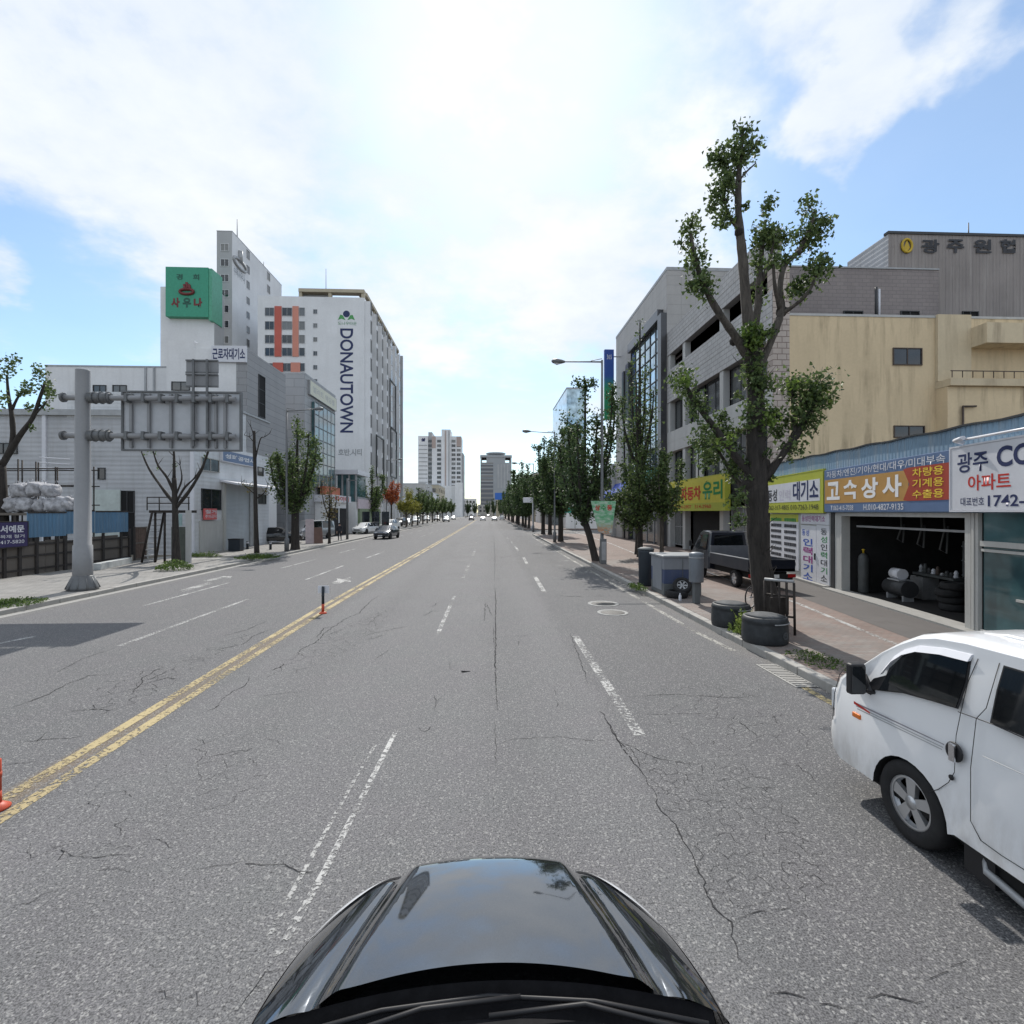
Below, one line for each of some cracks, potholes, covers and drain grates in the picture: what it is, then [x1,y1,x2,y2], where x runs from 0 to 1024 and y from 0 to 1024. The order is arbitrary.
crack [0,726,279,906]
crack [502,635,836,969]
crack [204,861,328,872]
crack [29,622,270,713]
crack [267,598,407,696]
drain grate [756,664,819,688]
